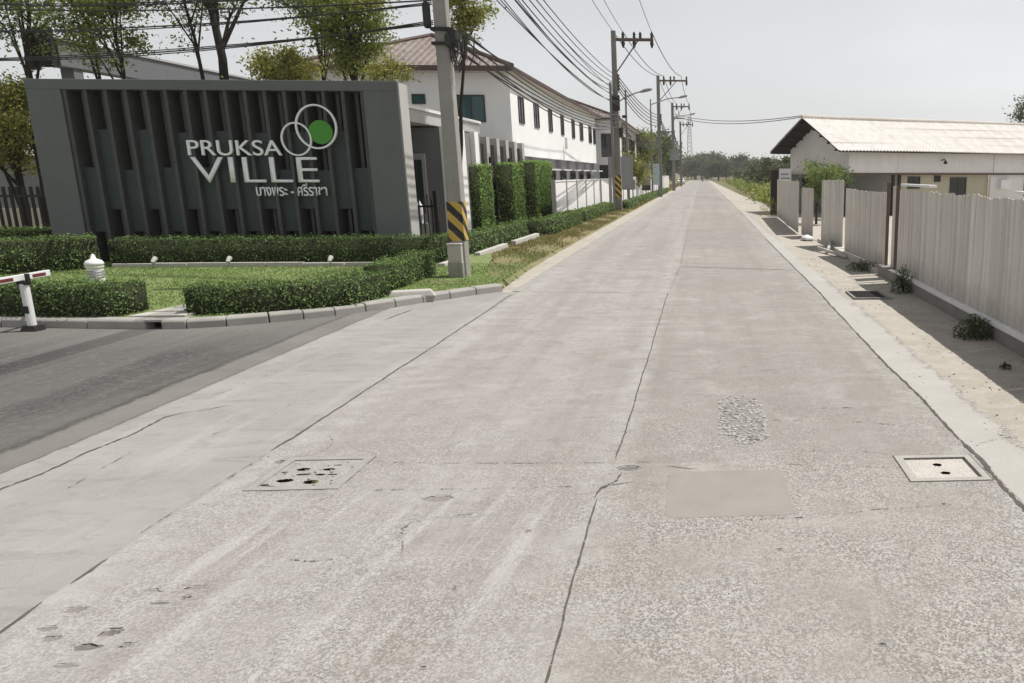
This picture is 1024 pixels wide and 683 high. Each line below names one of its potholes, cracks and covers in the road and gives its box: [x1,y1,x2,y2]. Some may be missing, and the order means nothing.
pothole [174,592,199,602]
drain grate [144,317,170,327]
manhole cover [892,454,994,482]
pothole [55,636,123,656]
pothole [45,600,104,618]
manhole cover [242,456,377,491]
pothole [37,658,95,674]
pothole [83,622,136,645]
pothole [24,629,80,647]
